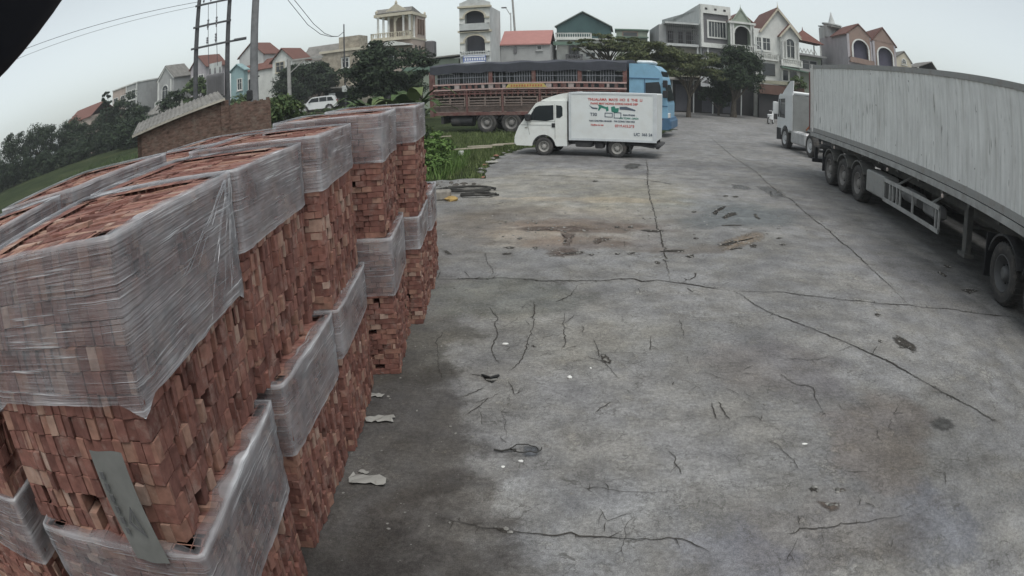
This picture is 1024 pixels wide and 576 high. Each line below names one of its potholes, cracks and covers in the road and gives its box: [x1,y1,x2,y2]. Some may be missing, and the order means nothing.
crack [456,285,657,440]
crack [445,452,711,553]
crack [787,497,902,560]
crack [734,291,1020,425]
